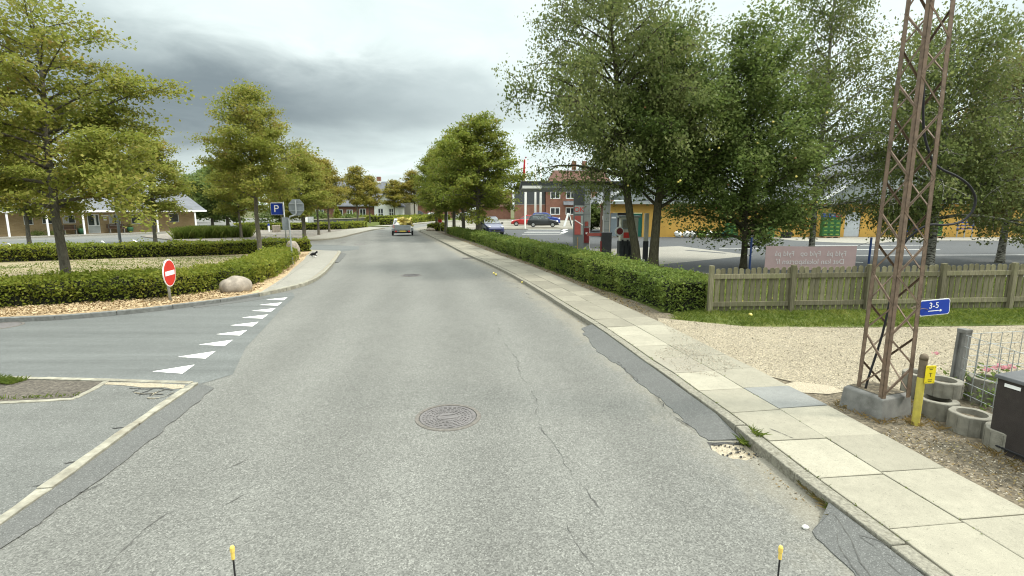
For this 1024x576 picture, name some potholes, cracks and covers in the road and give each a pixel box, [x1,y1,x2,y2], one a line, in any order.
manhole cover [415,404,481,431]
crack [106,514,166,570]
crack [498,328,599,507]
pothole [707,442,762,460]
